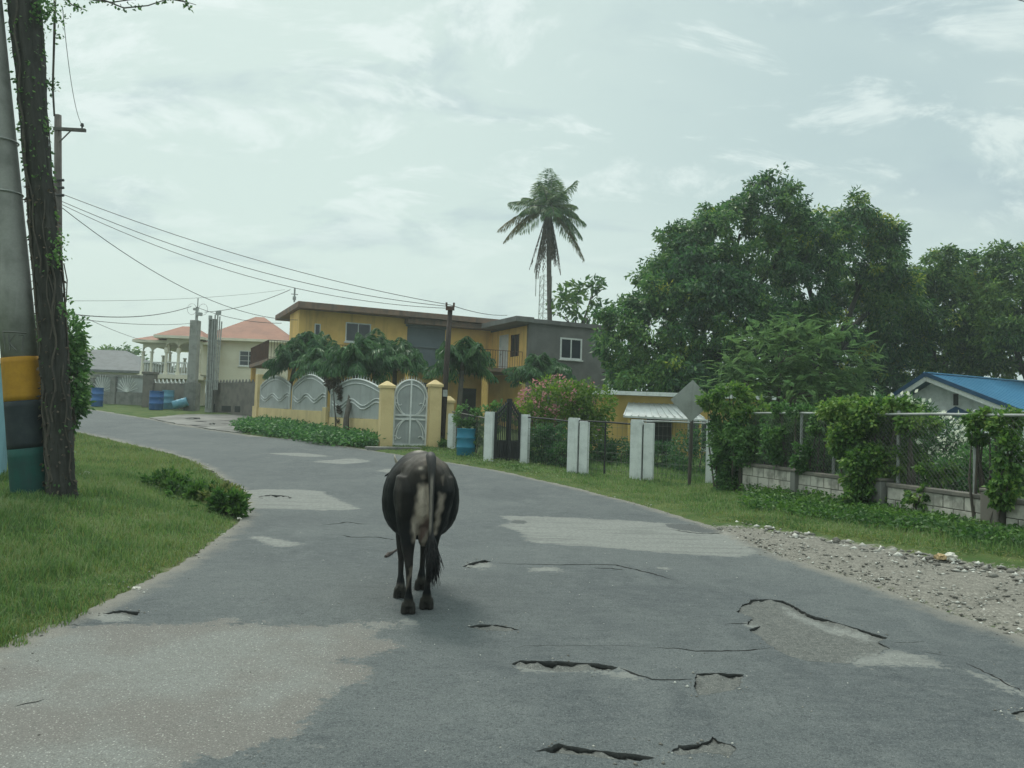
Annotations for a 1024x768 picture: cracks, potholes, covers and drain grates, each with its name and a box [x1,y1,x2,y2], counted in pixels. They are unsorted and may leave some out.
pothole [512,660,618,672]
pothole [463,560,491,568]
pothole [736,599,890,664]
pothole [694,673,744,695]
pothole [672,737,736,756]
pothole [537,743,654,761]
crack [899,641,1022,692]
crack [621,668,687,681]
crack [504,563,669,579]
pothole [104,610,140,618]
